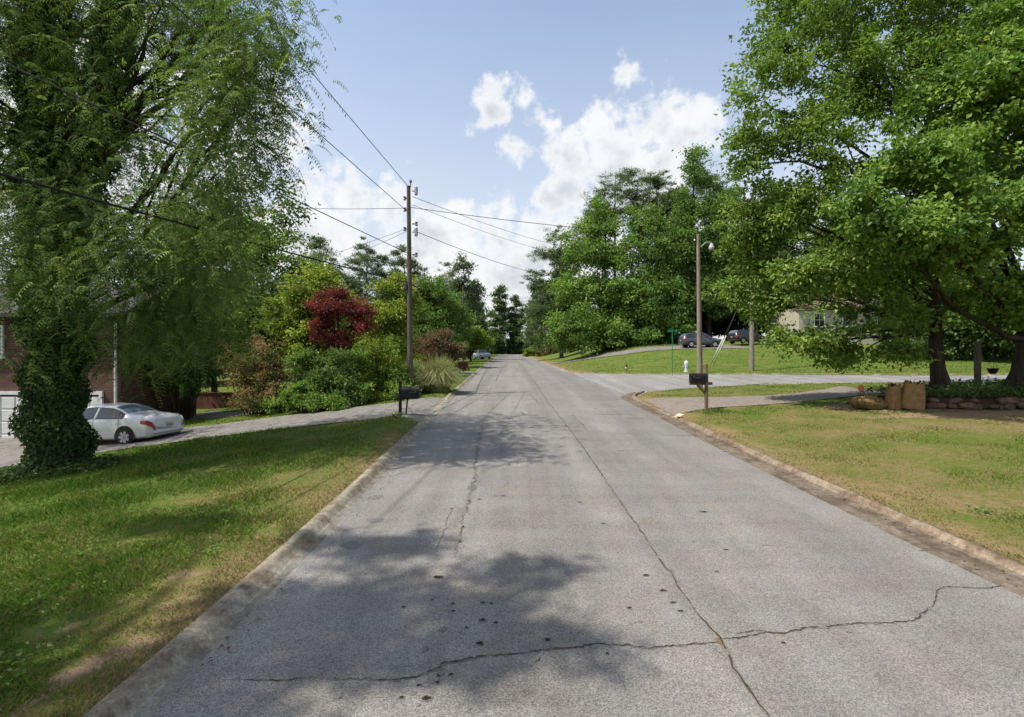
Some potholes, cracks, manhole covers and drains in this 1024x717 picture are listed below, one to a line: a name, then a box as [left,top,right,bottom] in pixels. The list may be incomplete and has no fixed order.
crack [438,428,484,555]
crack [336,585,1001,681]
